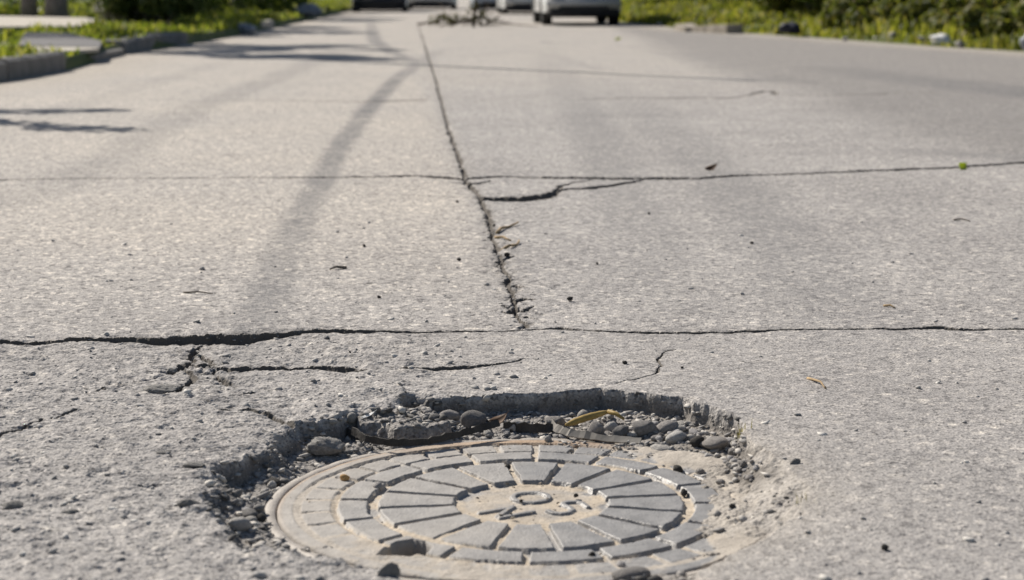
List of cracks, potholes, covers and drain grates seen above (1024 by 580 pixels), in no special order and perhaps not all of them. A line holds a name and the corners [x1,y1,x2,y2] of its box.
crack [0,25,1024,428]
manhole cover [264,438,762,580]
crack [0,408,83,438]
